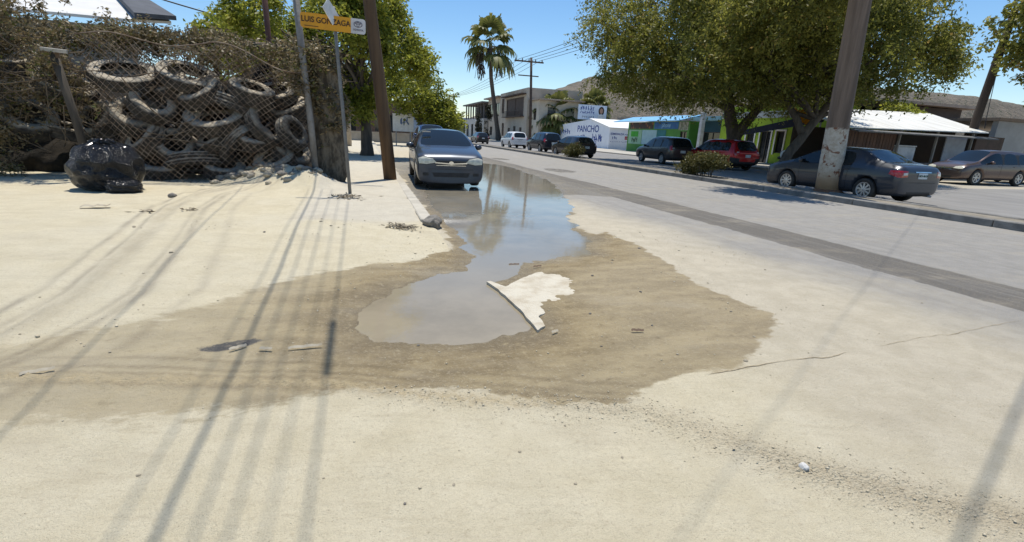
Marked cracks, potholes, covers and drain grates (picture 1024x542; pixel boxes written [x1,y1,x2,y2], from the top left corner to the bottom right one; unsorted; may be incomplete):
crack [708,352,845,375]
